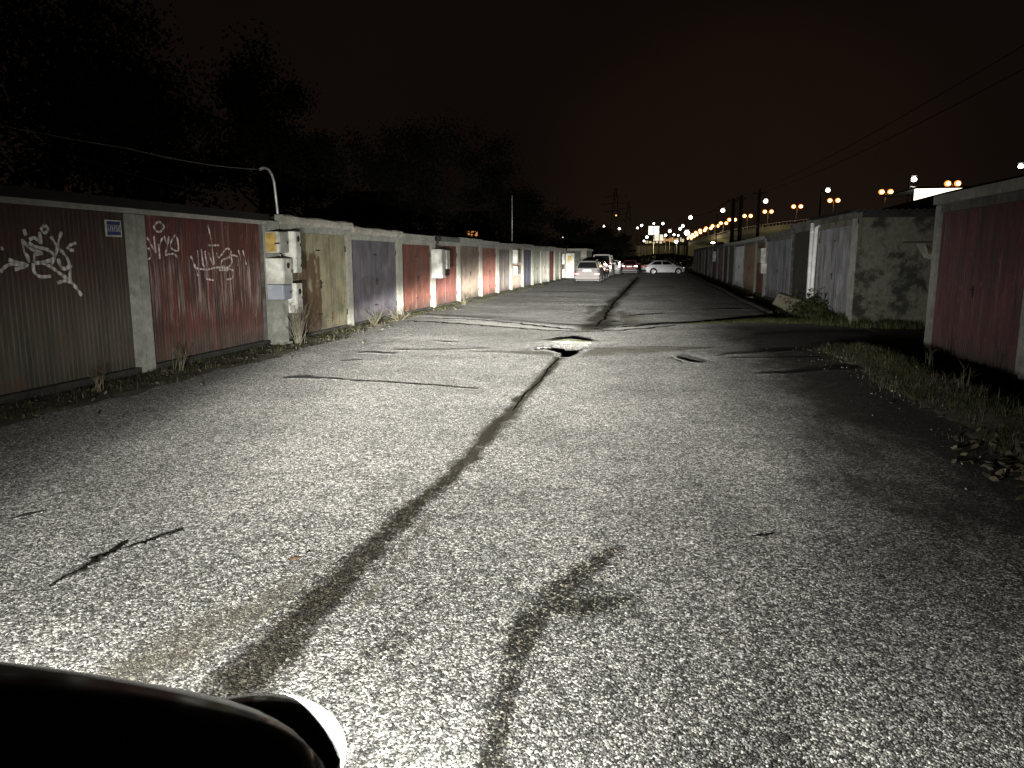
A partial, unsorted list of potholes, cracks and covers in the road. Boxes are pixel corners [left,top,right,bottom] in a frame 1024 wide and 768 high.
crack [352,380,479,389]
crack [512,358,559,411]
crack [48,528,184,587]
pothole [673,355,711,363]
pothole [531,344,592,358]
